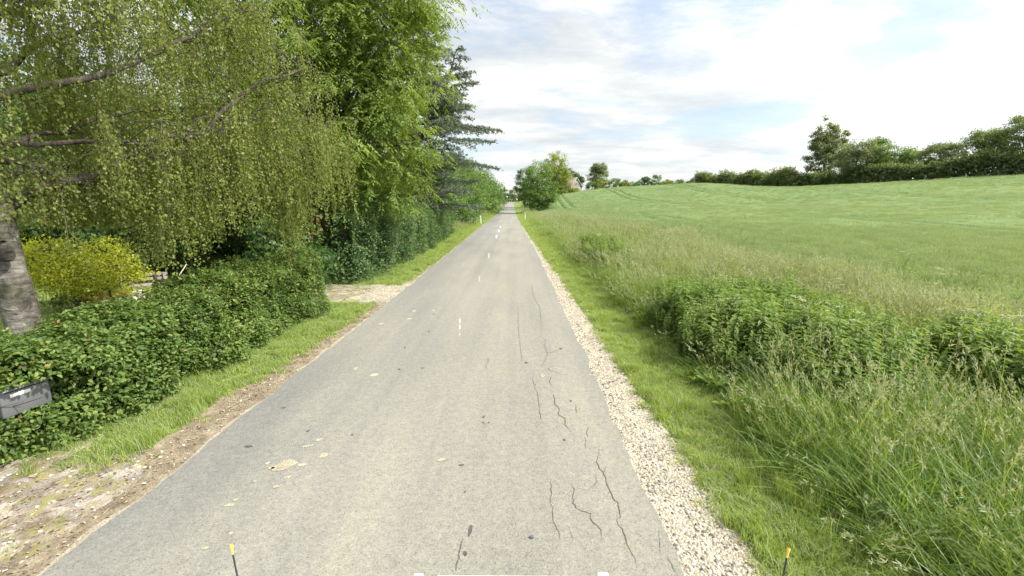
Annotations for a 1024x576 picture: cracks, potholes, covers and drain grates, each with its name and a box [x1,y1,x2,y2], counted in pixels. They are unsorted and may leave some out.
crack [532,287,637,571]
